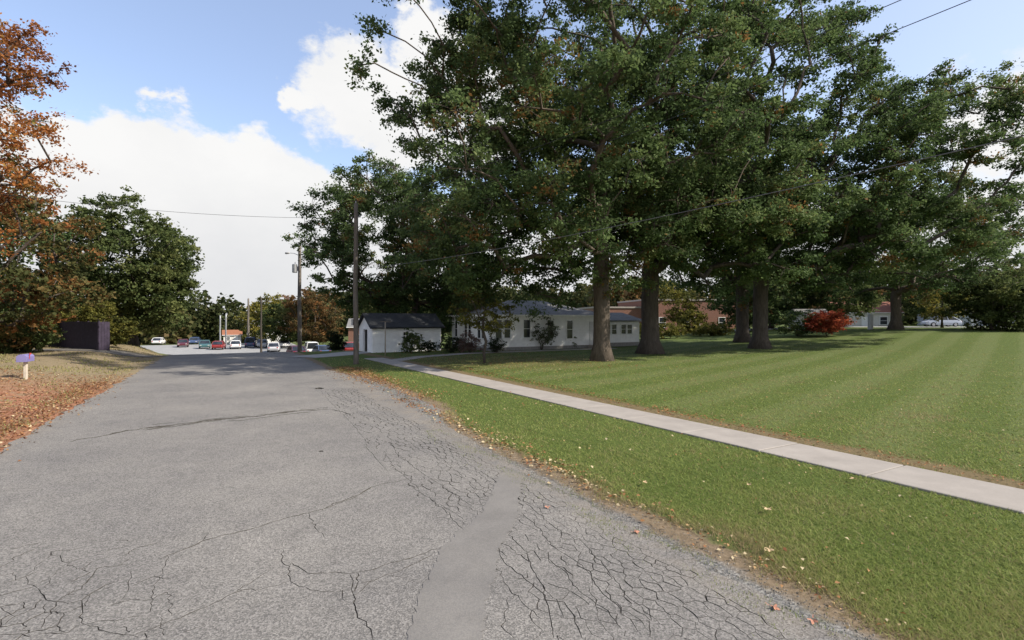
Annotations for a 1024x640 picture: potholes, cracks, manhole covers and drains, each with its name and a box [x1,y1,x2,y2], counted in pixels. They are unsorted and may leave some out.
crack [325,388,788,640]
crack [70,408,351,442]
crack [0,479,405,640]
